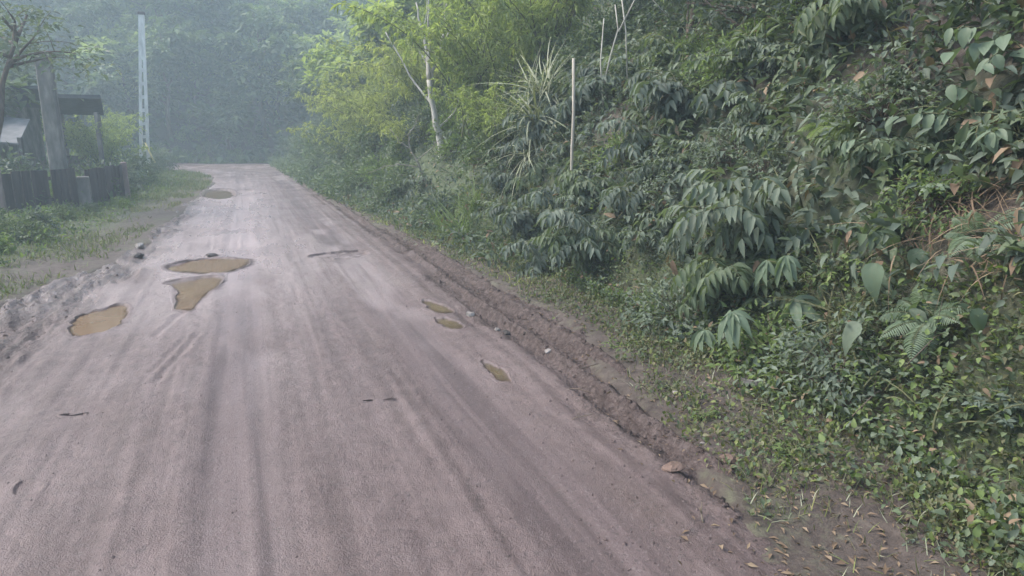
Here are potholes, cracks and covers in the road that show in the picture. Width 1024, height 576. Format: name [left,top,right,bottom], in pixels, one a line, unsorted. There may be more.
pothole [478,358,516,385]
pothole [200,188,240,200]
pothole [428,315,470,331]
pothole [417,298,460,316]
pothole [57,302,136,340]
pothole [161,274,228,315]
pothole [157,256,259,276]
